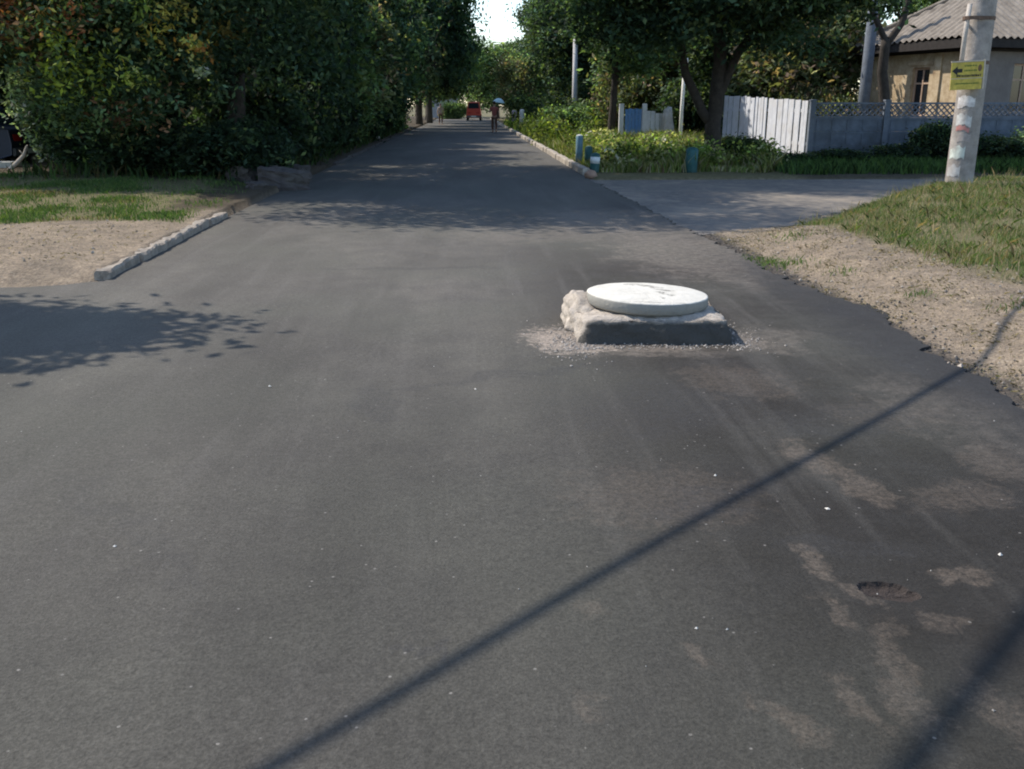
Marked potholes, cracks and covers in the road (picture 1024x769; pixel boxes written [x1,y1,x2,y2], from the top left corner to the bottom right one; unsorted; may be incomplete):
pothole [857,581,922,602]
manhole cover [560,283,732,345]
